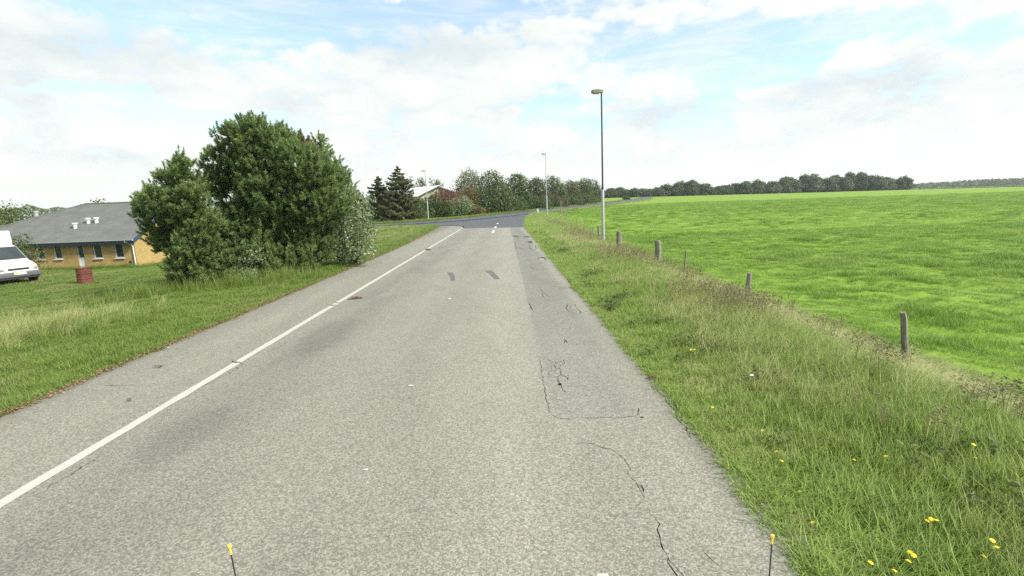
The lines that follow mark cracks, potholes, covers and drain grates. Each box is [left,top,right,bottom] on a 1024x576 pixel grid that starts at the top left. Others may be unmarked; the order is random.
crack [578,443,684,576]
crack [548,360,570,392]
